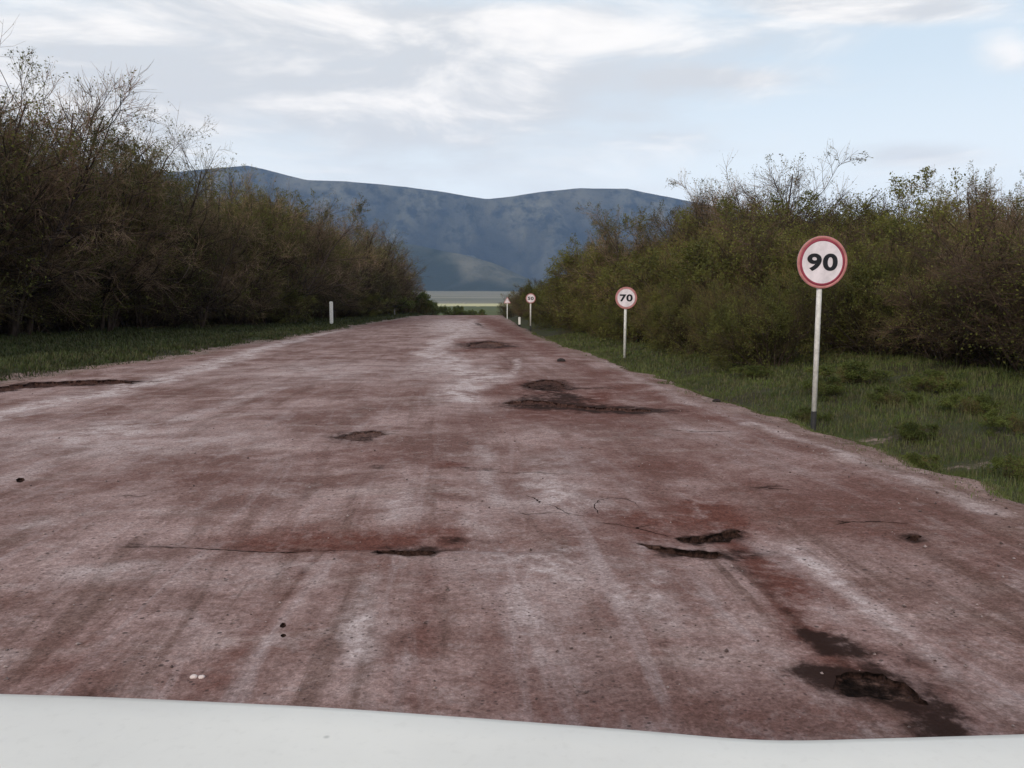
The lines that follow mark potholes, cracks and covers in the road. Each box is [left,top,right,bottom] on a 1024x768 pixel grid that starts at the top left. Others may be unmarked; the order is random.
crack [513,496,668,537]
pothole [833,671,928,705]
pothole [338,431,386,442]
pothole [0,380,139,392]
pothole [676,530,741,544]
pothole [505,400,651,412]
pothole [636,543,724,558]
pothole [524,380,565,391]
